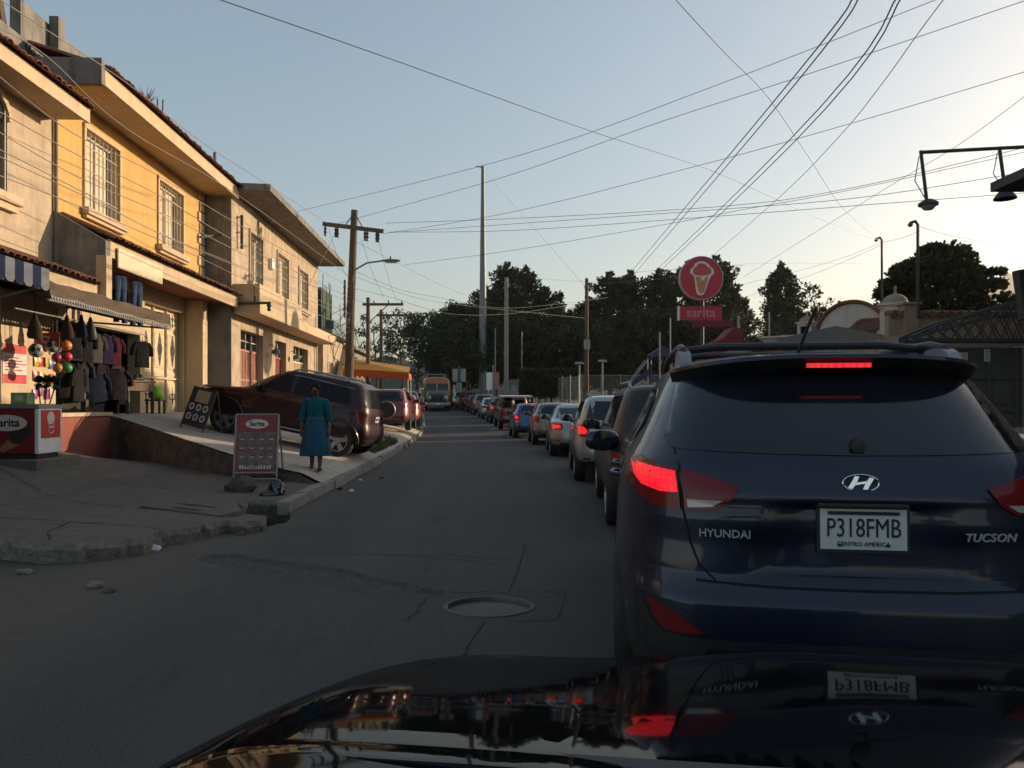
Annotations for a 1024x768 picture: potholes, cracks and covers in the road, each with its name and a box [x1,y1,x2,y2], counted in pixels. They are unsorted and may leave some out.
crack [462,621,485,655]
manhole cover [443,596,535,618]
